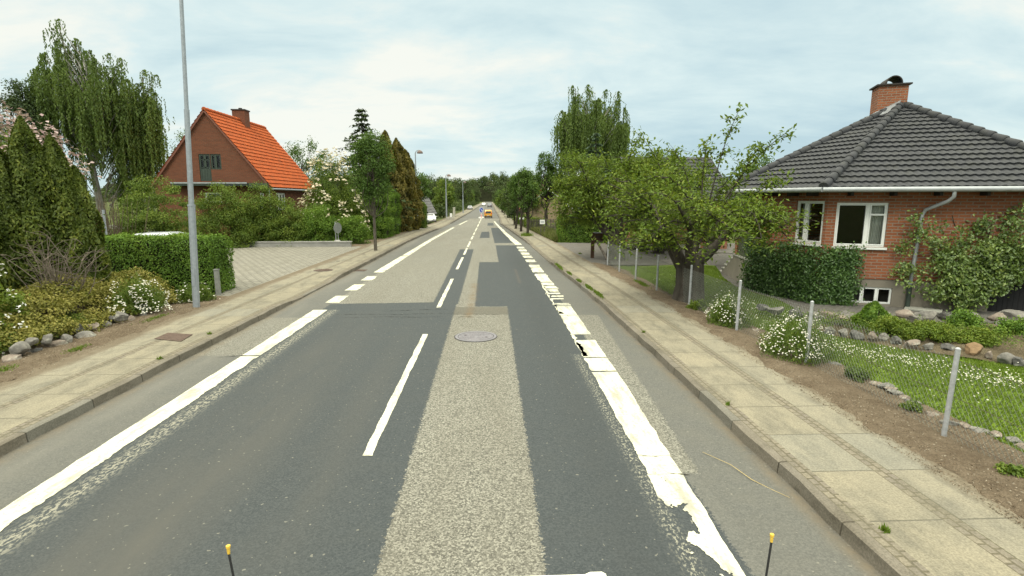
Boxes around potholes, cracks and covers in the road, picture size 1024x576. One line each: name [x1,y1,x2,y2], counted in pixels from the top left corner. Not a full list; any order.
manhole cover [454,331,497,342]
utility cover [154,333,193,341]
